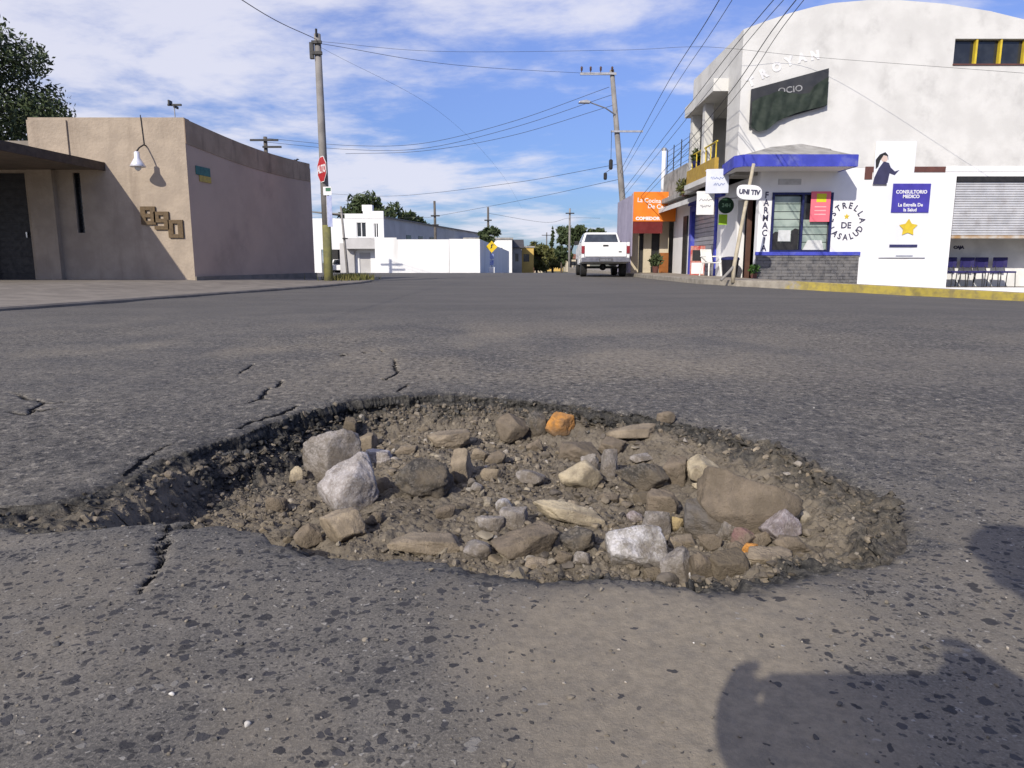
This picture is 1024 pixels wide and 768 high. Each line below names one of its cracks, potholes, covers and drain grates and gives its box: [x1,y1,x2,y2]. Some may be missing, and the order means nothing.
crack [139,523,170,592]
crack [238,365,297,429]
crack [10,395,63,416]
pothole [0,395,908,594]
crack [339,351,407,392]
